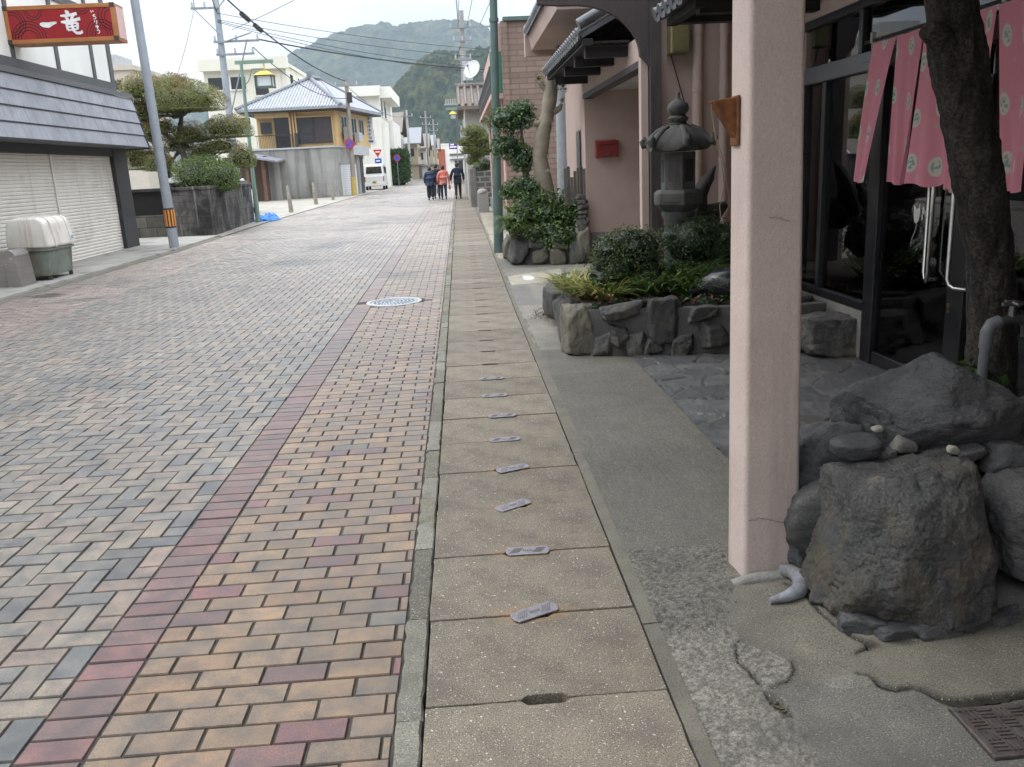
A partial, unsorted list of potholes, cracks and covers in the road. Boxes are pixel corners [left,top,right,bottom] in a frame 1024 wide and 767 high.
manhole cover [366,297,422,307]
